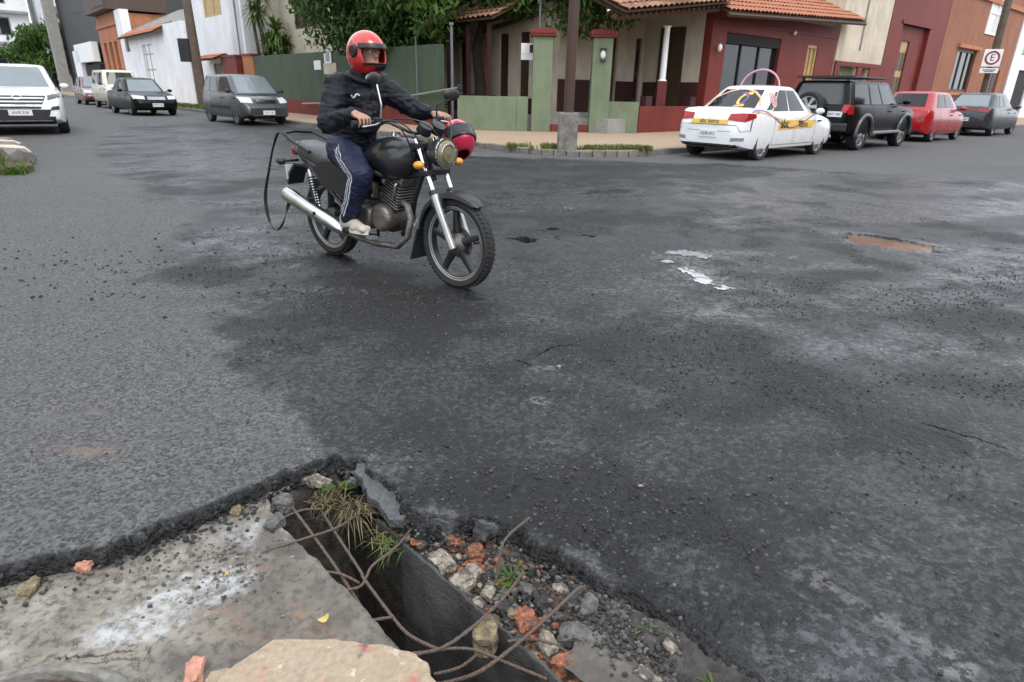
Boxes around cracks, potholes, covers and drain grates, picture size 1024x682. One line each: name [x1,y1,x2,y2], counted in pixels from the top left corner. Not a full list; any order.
pothole [269,474,759,682]
crack [891,412,1024,462]
pothole [493,233,553,248]
pothole [823,229,969,258]
crack [37,643,151,665]
crack [514,341,600,366]
